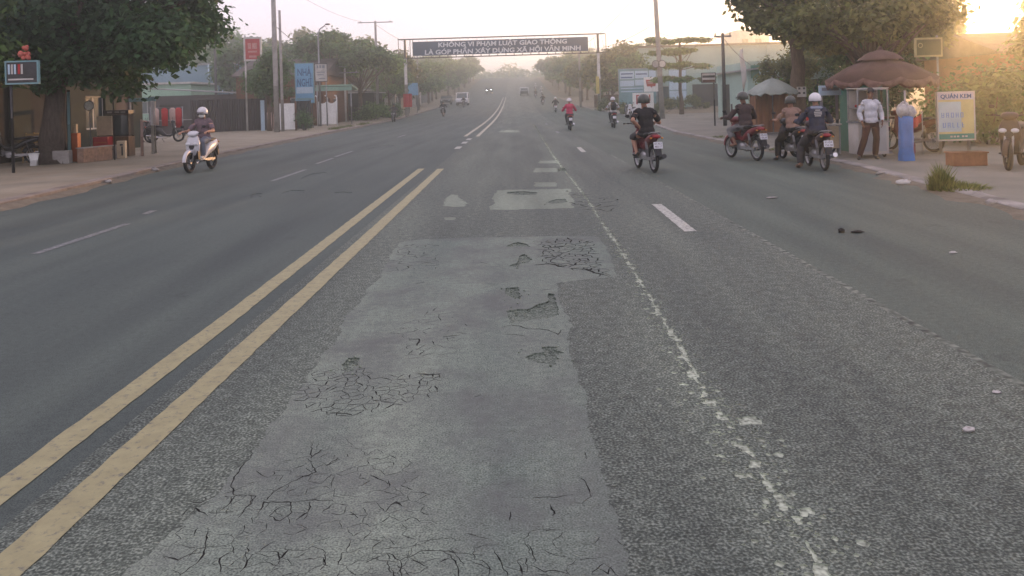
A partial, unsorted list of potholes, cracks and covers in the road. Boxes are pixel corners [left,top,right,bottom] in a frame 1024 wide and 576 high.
pothole [330,356,362,375]
crack [366,512,629,576]
pothole [501,287,525,301]
crack [292,368,441,417]
pothole [510,254,532,268]
pothole [506,293,559,323]
pothole [517,346,574,367]
crack [163,435,429,576]
